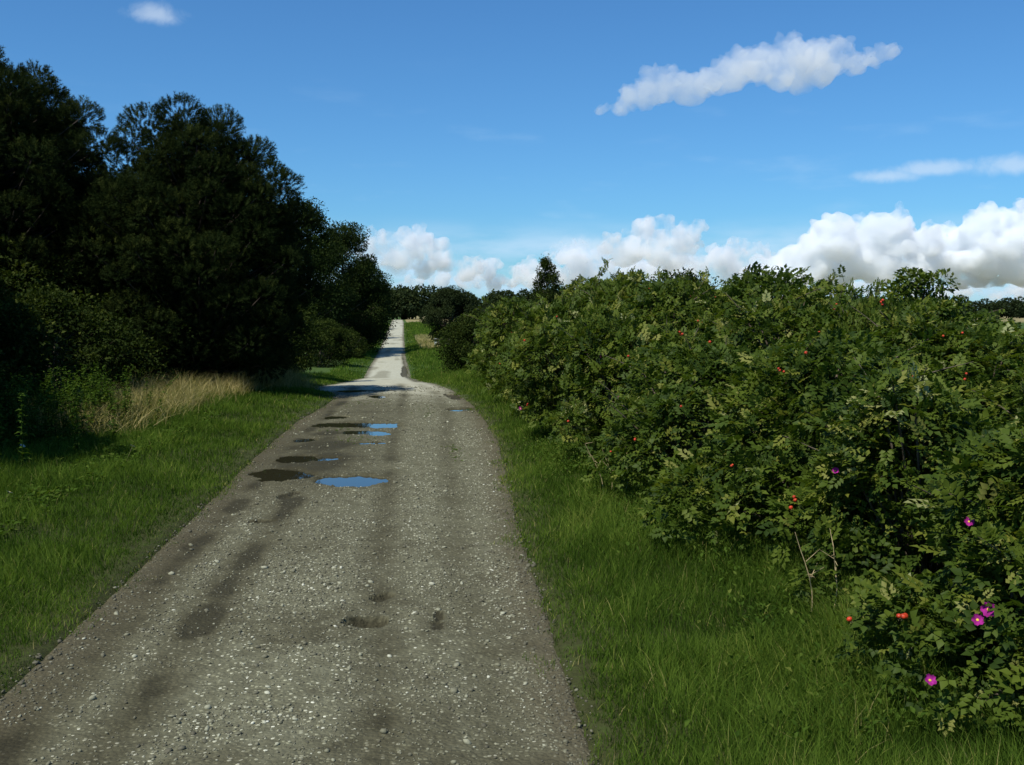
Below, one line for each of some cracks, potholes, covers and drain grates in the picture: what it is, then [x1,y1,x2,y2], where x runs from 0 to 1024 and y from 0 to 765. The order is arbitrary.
pothole [368,591,396,603]
pothole [340,615,392,628]
pothole [246,466,322,483]
pothole [308,471,393,488]
pothole [311,420,407,429]
pothole [427,610,446,631]
pothole [275,453,346,463]
